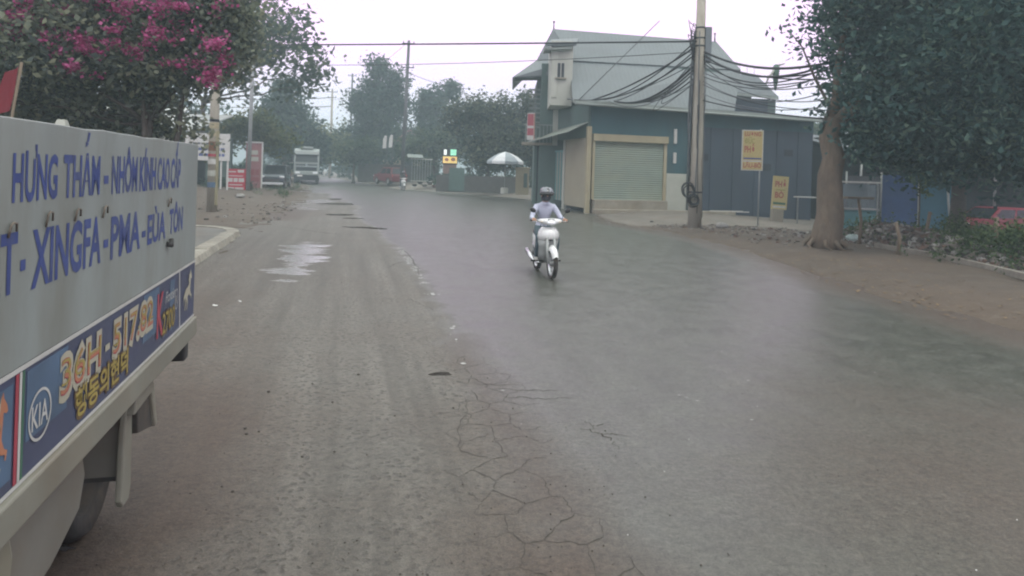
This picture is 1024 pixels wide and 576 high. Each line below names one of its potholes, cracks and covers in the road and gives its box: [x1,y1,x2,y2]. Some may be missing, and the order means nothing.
crack [431,356,644,576]
